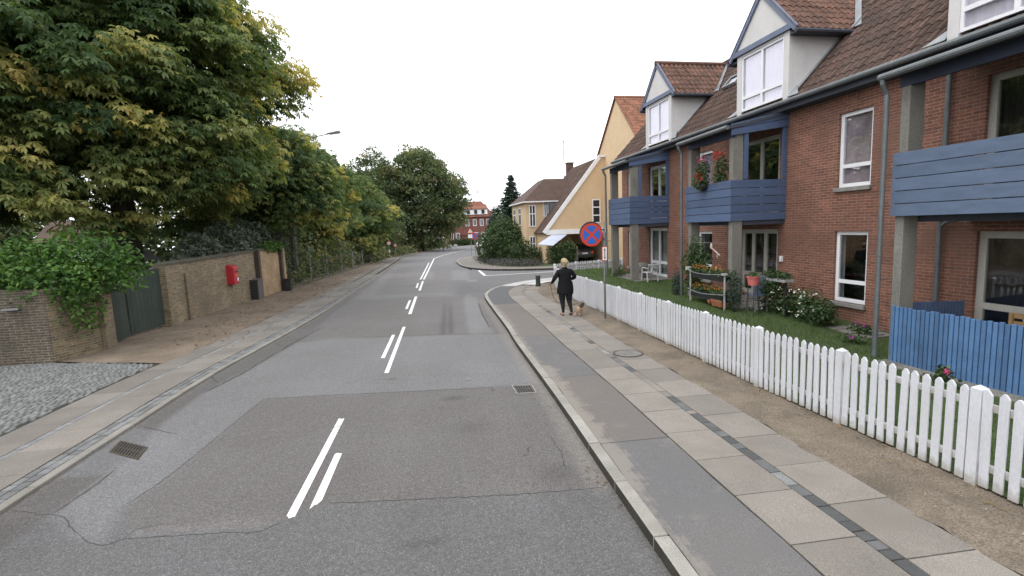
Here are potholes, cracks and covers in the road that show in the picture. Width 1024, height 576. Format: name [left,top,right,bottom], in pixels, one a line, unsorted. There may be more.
crack [11,473,111,534]
drain grate [511,385,537,394]
drain grate [109,440,148,460]
